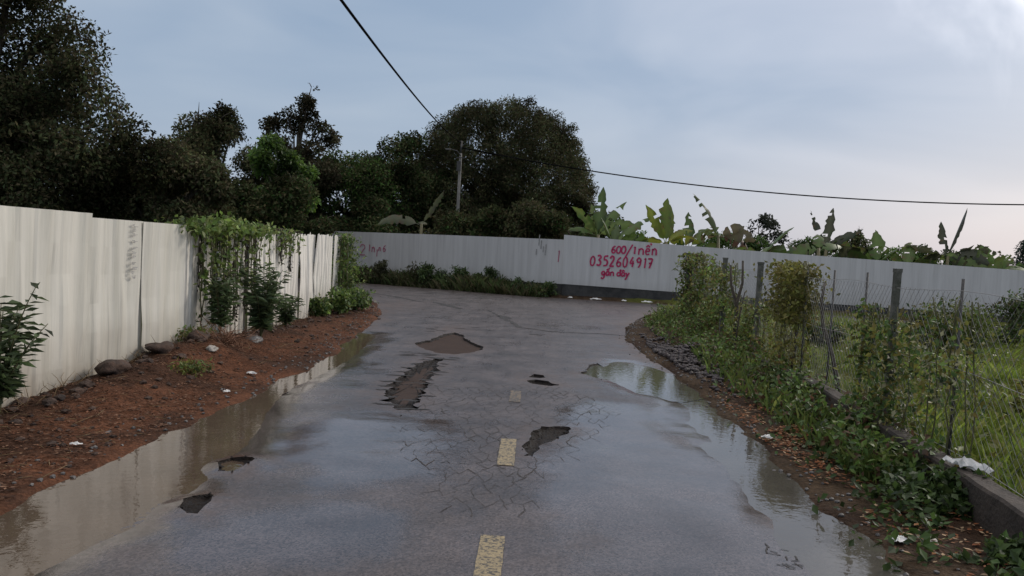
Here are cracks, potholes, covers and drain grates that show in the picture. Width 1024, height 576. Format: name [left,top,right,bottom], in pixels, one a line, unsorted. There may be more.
crack [393,384,613,516]
pothole [377,357,452,416]
pothole [179,492,213,514]
pothole [399,327,483,360]
pothole [522,426,571,456]
pothole [218,455,257,473]
